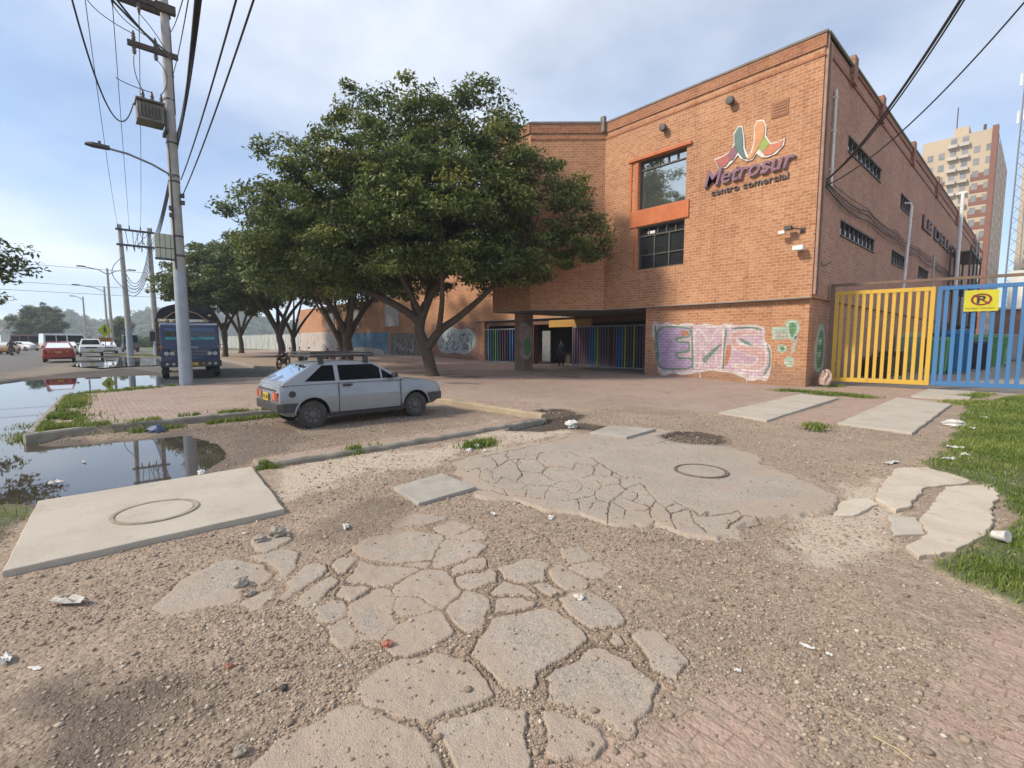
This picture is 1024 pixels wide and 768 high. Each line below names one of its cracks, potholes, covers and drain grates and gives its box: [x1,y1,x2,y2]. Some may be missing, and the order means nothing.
crack [279,522,664,723]
manhole cover [674,463,729,479]
pothole [505,409,605,432]
crack [463,435,764,533]
manhole cover [108,498,199,525]
pothole [659,431,727,445]
